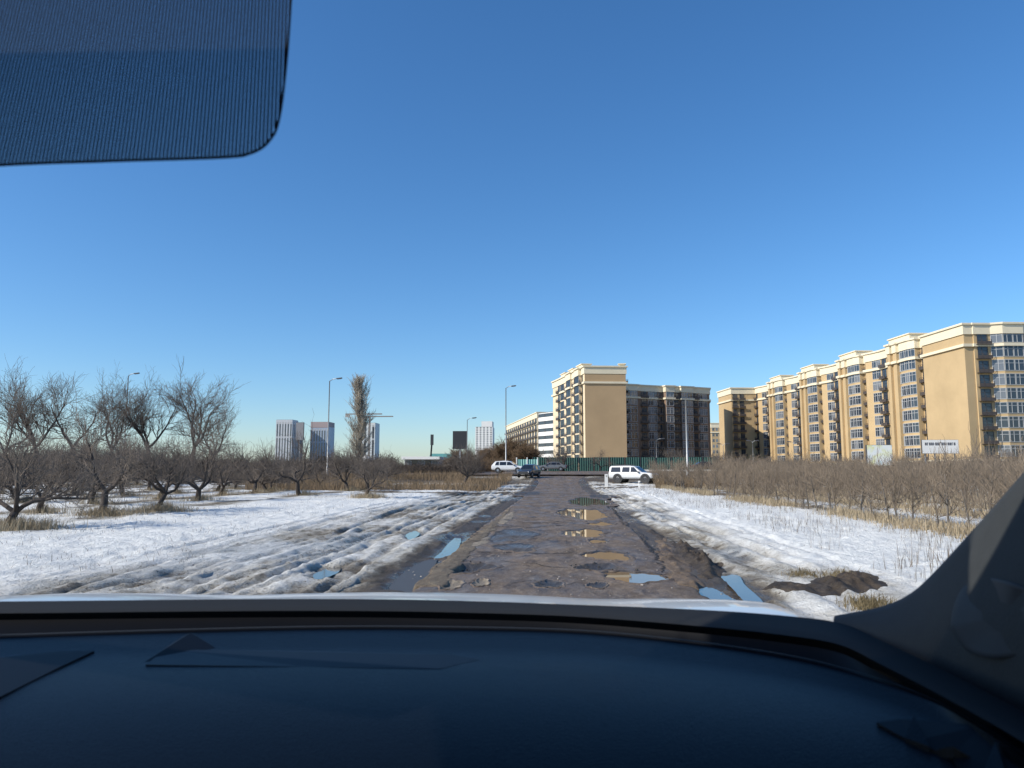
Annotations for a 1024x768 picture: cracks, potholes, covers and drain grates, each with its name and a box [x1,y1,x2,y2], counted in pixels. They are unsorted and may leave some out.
pothole [574,549,636,562]
pothole [556,528,611,538]
pothole [594,568,675,585]
pothole [485,527,548,544]
pothole [564,496,619,507]
pothole [550,508,616,523]
pothole [487,542,540,553]
